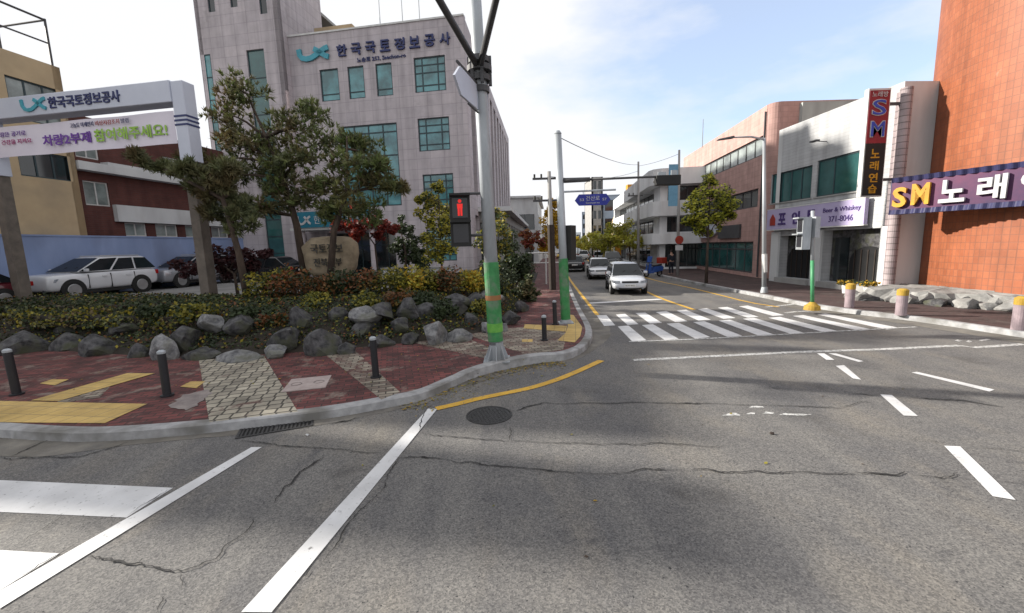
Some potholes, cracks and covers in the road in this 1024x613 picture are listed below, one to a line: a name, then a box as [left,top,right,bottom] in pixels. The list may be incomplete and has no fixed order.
drain grate [235,420,314,439]
crack [516,387,840,411]
crack [91,440,1022,610]
manhole cover [466,406,512,425]
crack [843,393,997,407]
utility cover [282,375,332,392]
